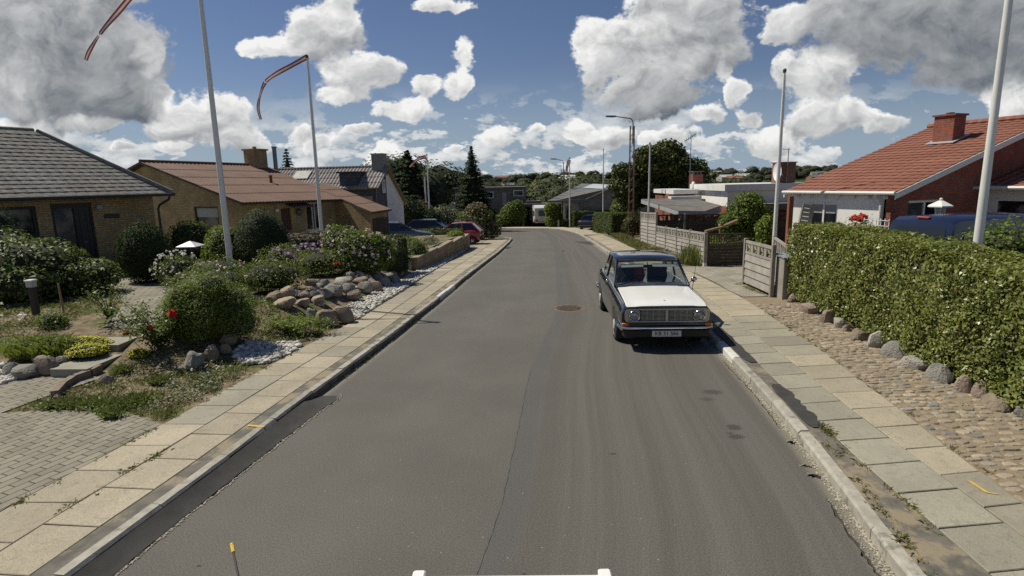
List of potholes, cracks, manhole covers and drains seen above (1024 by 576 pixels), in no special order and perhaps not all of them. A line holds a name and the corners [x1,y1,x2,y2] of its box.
crack [476,372,531,576]
